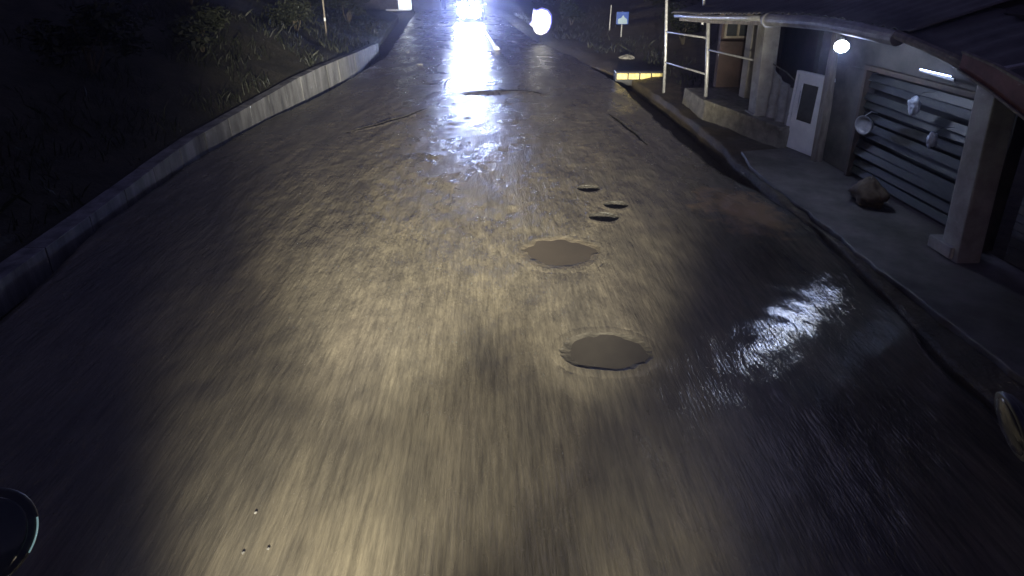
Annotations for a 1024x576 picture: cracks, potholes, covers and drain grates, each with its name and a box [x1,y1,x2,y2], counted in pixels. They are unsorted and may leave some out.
pothole [510,234,608,273]
pothole [571,183,606,194]
crack [345,107,431,133]
pothole [582,209,626,225]
pothole [549,326,665,379]
crack [604,113,652,146]
pothole [597,198,635,212]
